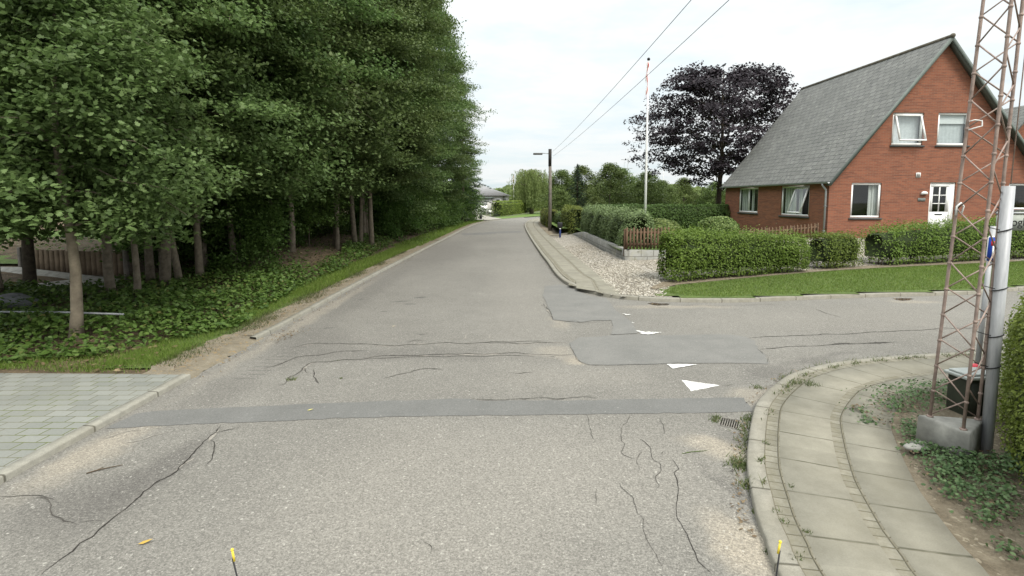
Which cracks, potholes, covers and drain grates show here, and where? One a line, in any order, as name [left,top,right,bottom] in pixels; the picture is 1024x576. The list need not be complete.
crack [754,310,986,349]
crack [267,340,574,386]
crack [619,416,712,574]
drain grate [718,417,741,430]
crack [0,426,240,575]
